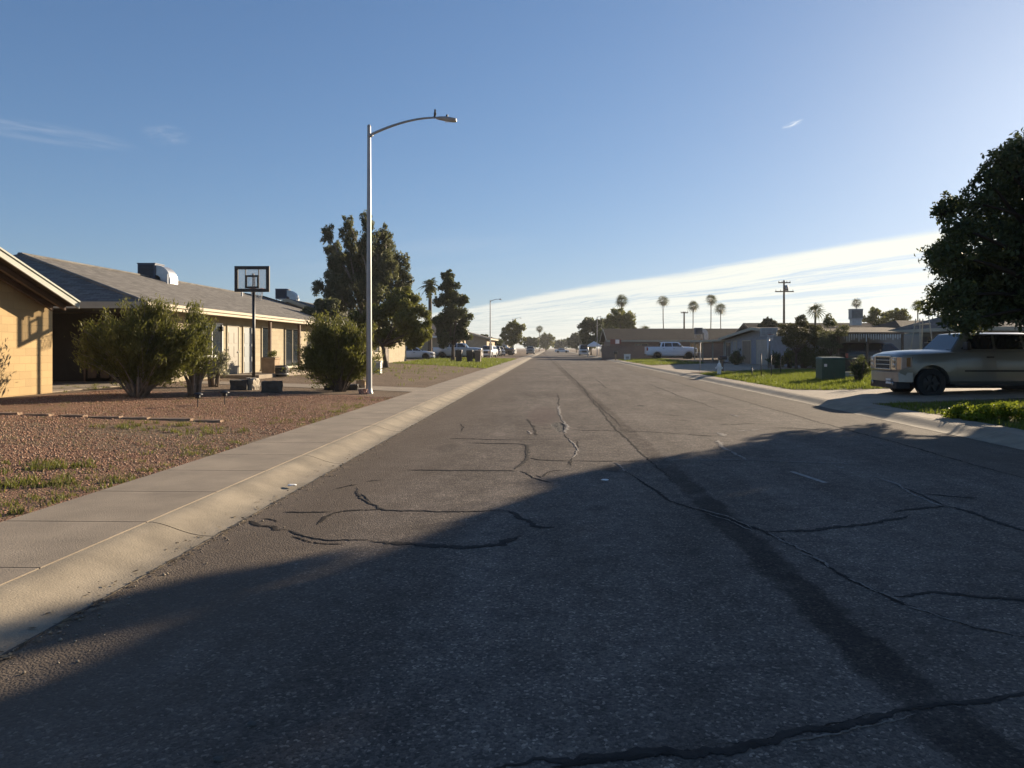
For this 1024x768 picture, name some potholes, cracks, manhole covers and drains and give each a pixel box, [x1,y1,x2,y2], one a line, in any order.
crack [614,462,1024,637]
